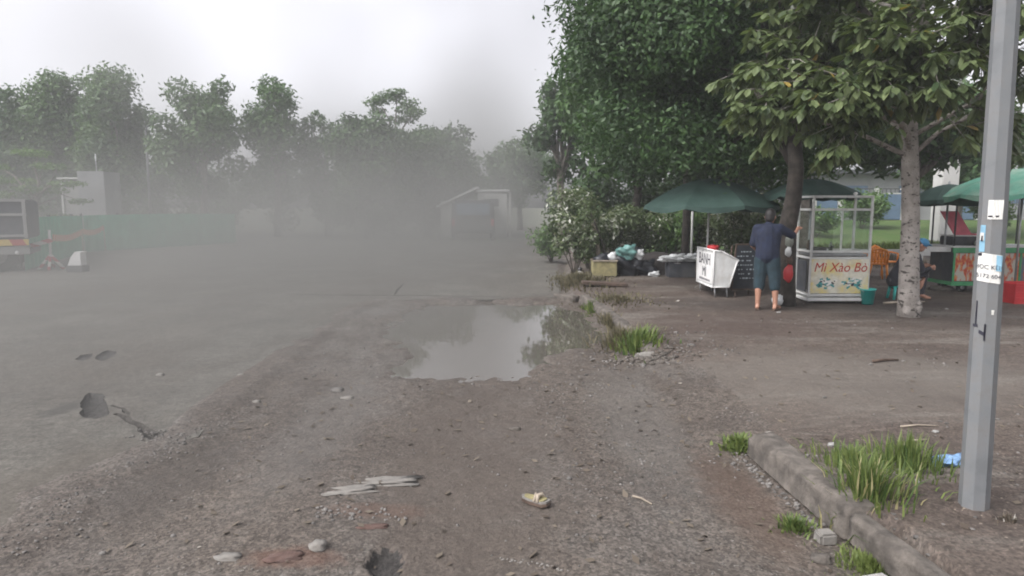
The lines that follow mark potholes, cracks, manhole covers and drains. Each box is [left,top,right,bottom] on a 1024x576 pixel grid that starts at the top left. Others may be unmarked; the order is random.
pothole [352,541,416,576]
pothole [95,350,116,361]
crack [112,405,191,444]
pothole [343,298,618,387]
pothole [79,393,110,419]
